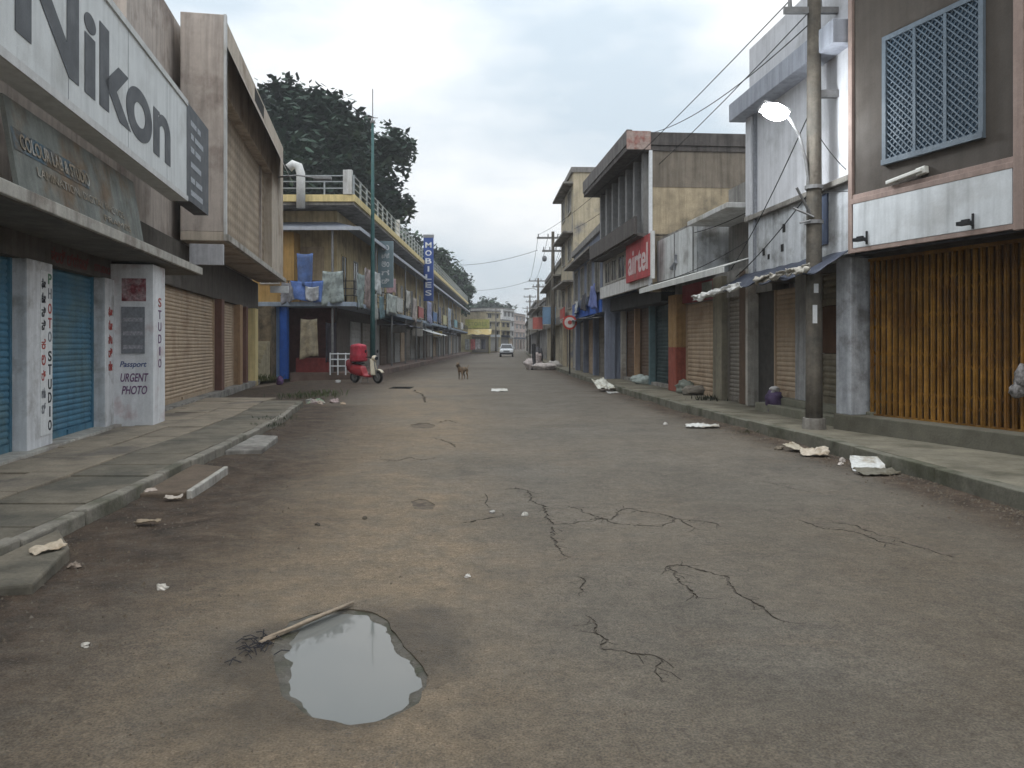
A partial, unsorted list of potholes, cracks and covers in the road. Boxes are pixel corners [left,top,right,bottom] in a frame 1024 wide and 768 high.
crack [389,420,456,461]
crack [662,562,802,624]
pothole [271,608,428,725]
pothole [411,499,435,510]
crack [574,615,681,682]
crack [464,486,719,596]
crack [799,520,959,558]
